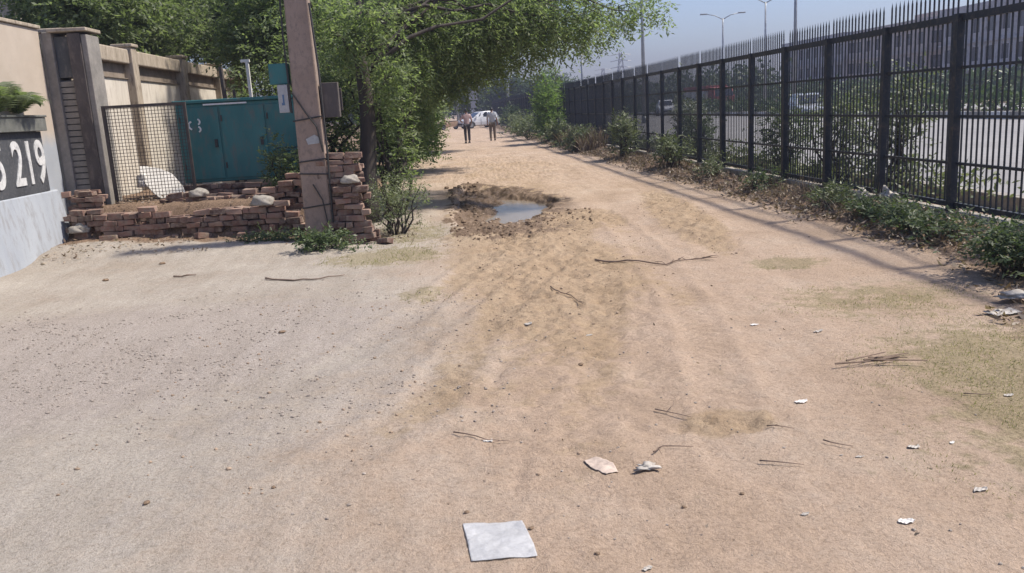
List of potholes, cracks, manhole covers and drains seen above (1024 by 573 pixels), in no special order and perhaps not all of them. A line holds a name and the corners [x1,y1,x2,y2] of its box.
pothole [448,182,593,241]
